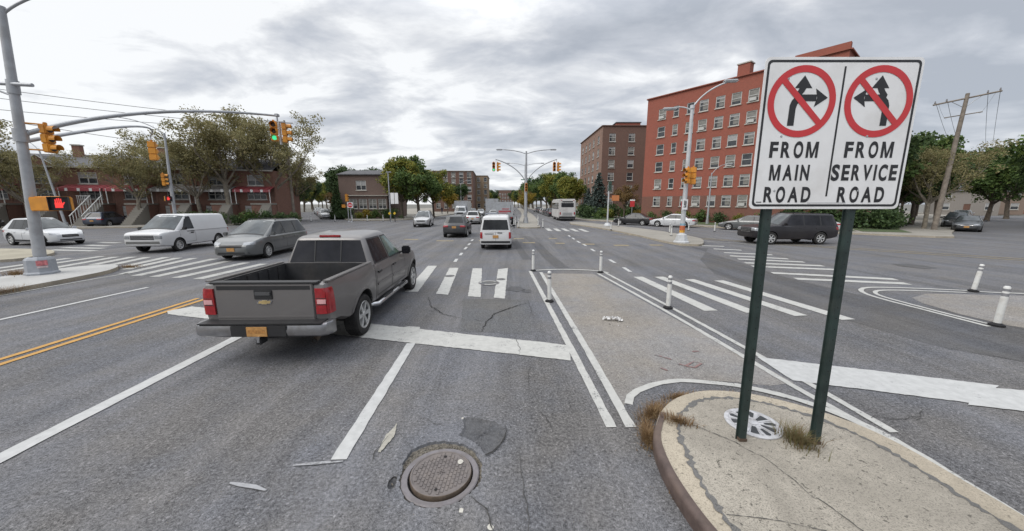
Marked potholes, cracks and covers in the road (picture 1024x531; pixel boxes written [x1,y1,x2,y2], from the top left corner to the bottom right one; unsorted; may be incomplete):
manhole cover [401,449,479,509]
crack [471,496,493,530]
crack [428,297,532,330]
